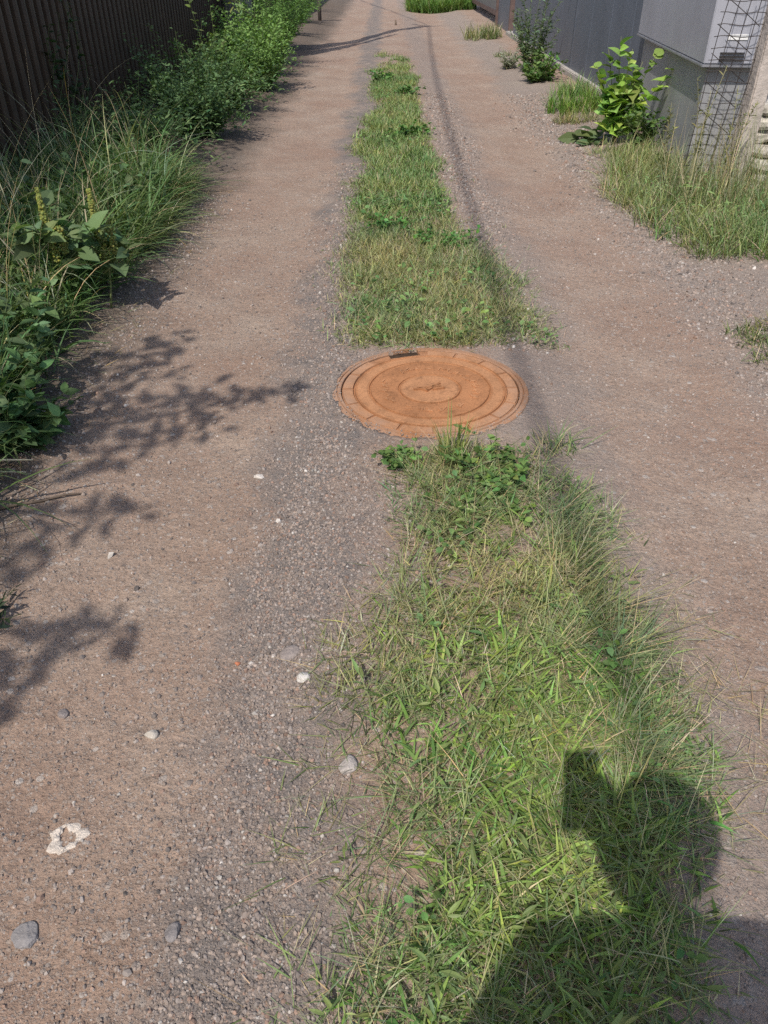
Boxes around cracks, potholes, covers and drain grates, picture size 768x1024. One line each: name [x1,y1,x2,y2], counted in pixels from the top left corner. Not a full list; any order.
manhole cover [333,348,529,439]
